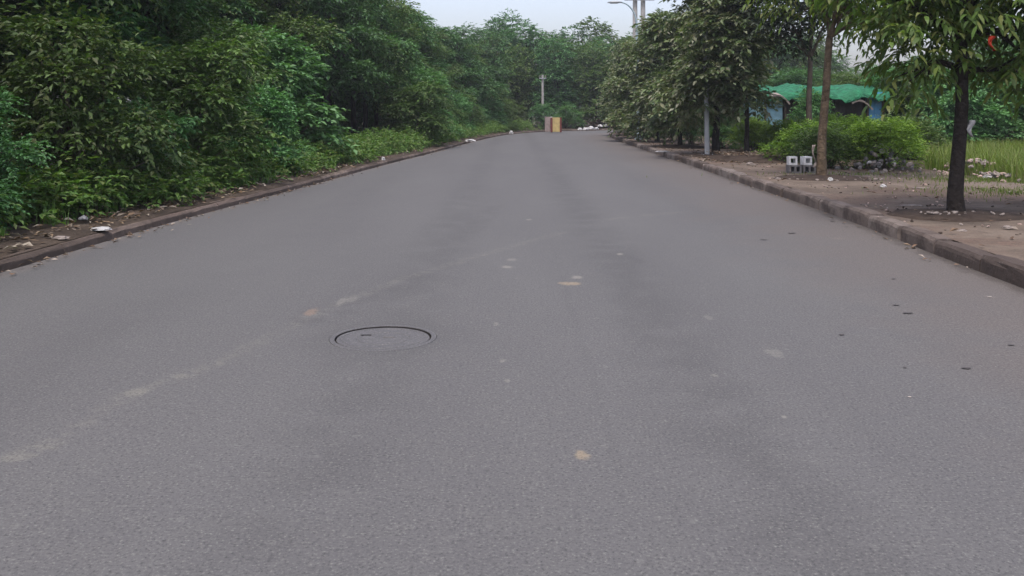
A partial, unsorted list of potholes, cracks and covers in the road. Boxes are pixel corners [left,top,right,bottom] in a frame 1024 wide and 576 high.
manhole cover [329,325,437,352]
